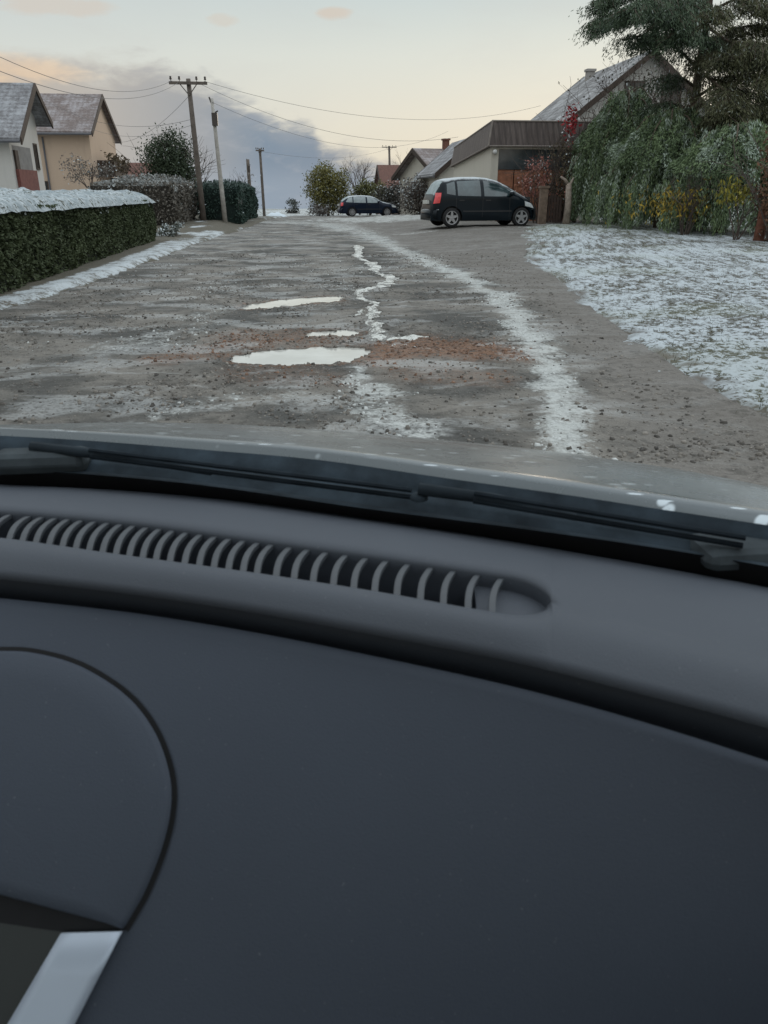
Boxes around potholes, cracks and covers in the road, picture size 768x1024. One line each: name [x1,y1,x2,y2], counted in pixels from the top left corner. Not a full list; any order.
pothole [221,343,383,367]
crack [347,245,429,342]
pothole [233,294,352,311]
pothole [295,327,368,338]
